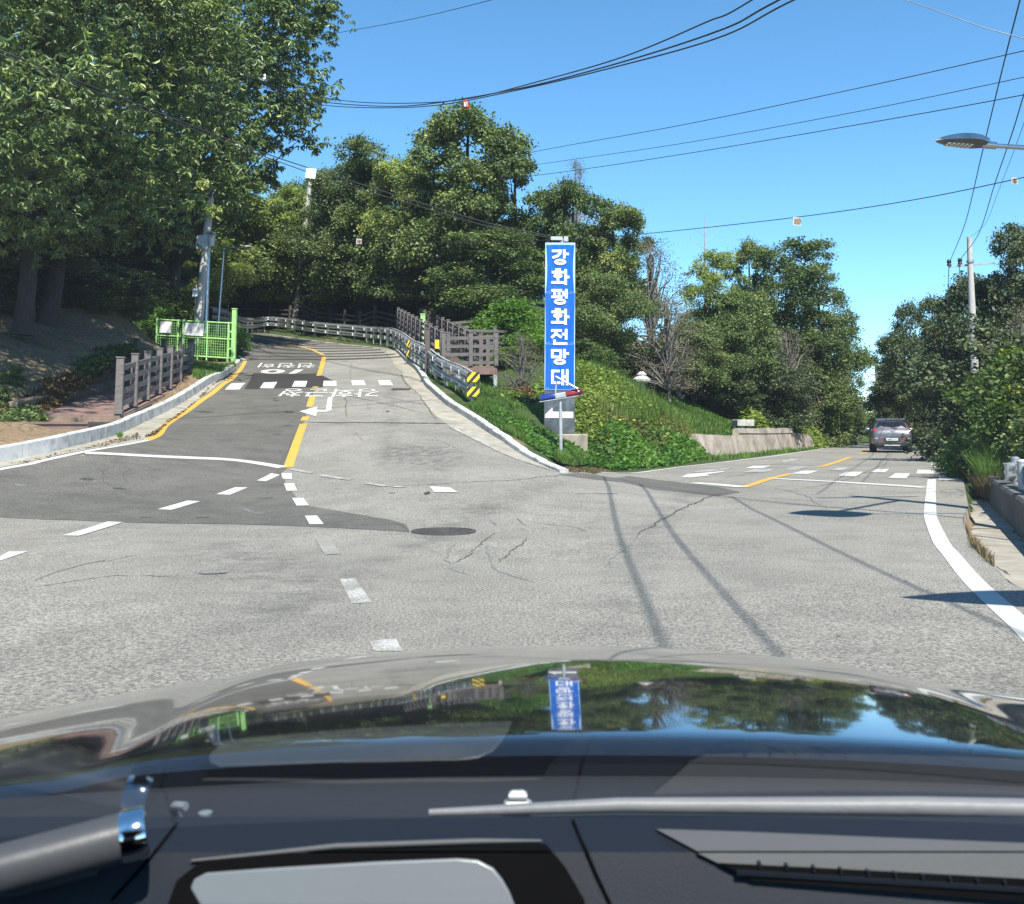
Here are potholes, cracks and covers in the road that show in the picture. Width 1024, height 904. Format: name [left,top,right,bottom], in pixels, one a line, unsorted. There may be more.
manhole cover [411,527,476,536]
crack [34,552,183,587]
crack [605,472,756,565]
crack [344,391,424,437]
crack [444,517,586,581]
